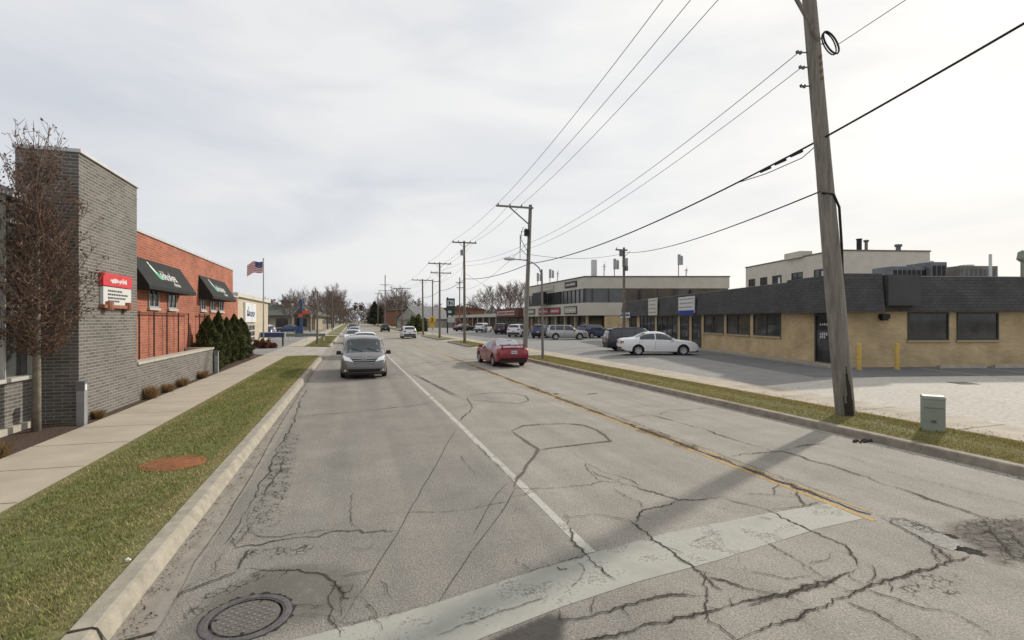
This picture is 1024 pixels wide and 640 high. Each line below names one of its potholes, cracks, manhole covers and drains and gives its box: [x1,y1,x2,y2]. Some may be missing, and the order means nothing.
crack [418,406,1024,640]
manhole cover [198,594,292,640]
crack [177,391,444,633]
pothole [954,546,990,558]
